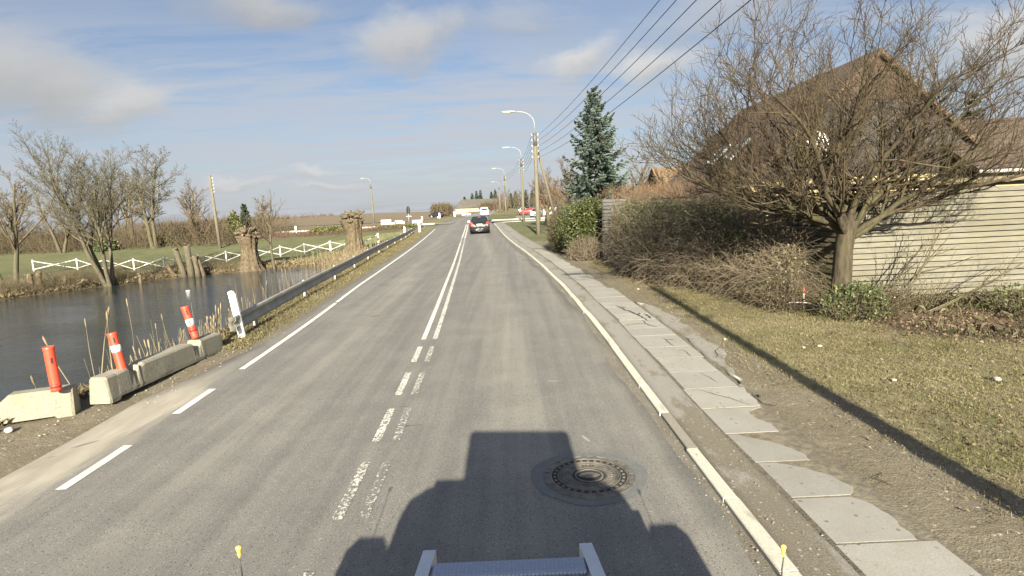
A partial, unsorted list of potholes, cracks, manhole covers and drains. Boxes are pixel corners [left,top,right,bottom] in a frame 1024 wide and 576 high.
crack [618,306,690,355]
manhole cover [544,456,636,499]
